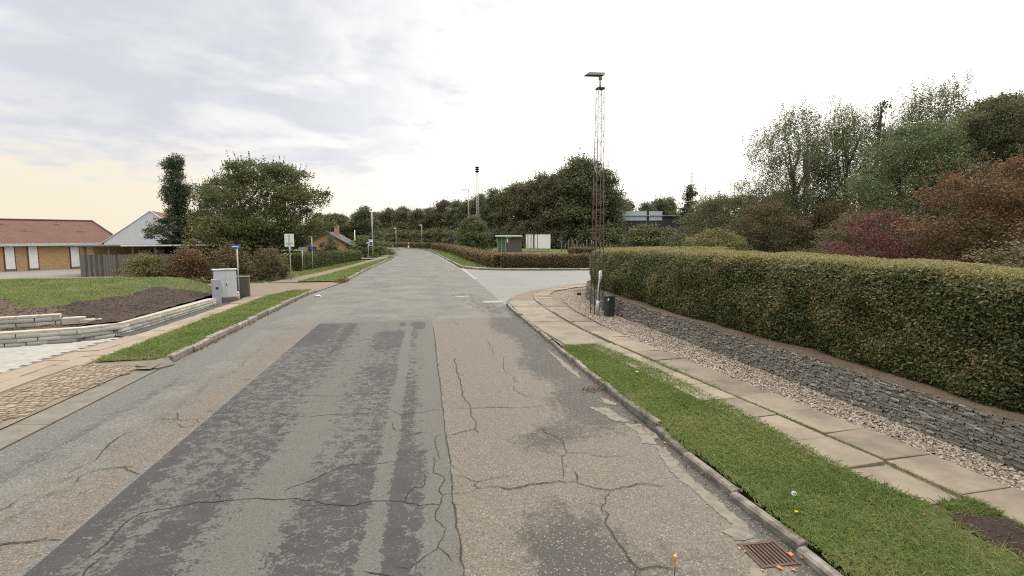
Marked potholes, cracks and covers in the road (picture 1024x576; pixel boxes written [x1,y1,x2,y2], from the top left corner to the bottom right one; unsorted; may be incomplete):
crack [0,520,82,549]
crack [82,427,670,576]
crack [450,343,542,435]
crack [68,431,140,494]
drain grate [737,540,802,569]
